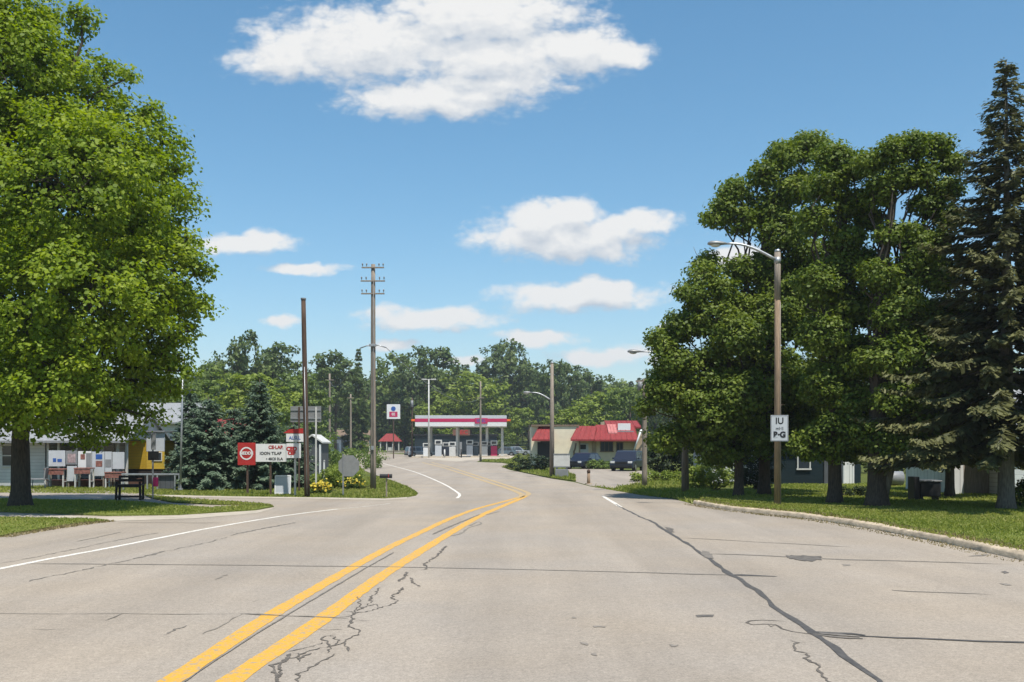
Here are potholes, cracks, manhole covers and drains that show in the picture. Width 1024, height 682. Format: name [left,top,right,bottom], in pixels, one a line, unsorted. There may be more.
crack [269,511,499,682]
crack [745,620,831,682]
